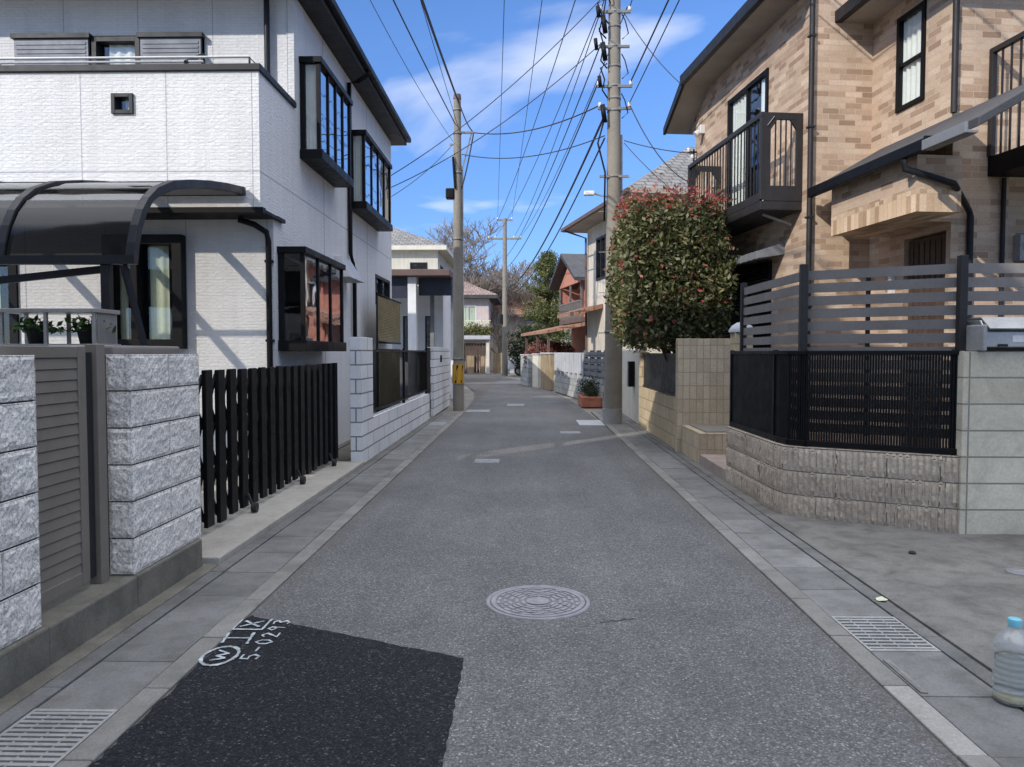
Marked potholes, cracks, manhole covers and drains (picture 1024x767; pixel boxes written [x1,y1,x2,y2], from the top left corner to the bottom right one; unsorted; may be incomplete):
drain grate [831,616,941,653]
drain grate [0,709,118,767]
manhole cover [486,585,590,620]
